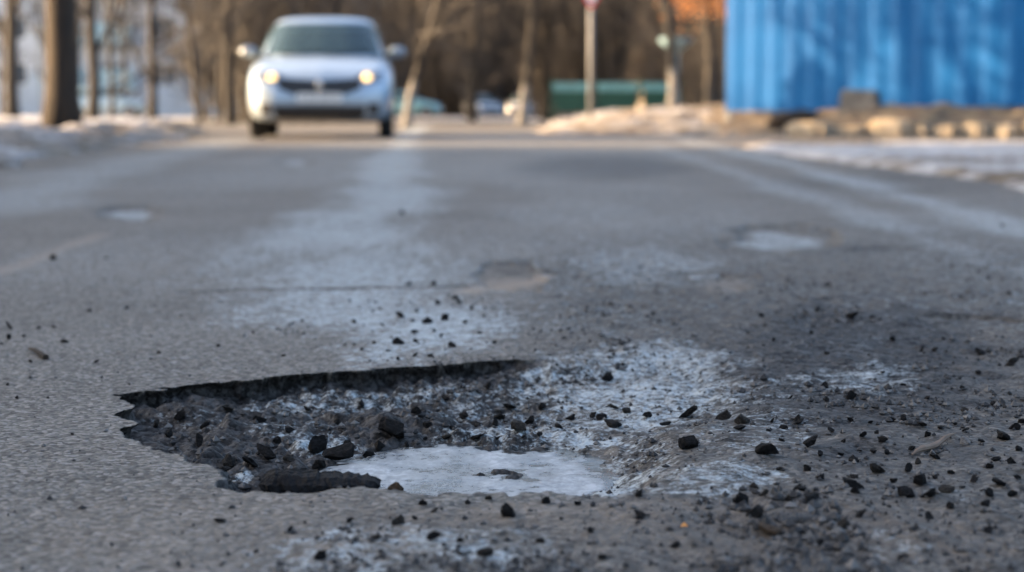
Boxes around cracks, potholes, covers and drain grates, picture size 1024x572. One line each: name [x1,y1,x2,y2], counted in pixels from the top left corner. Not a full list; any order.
pothole [87,202,168,221]
pothole [112,349,792,502]
pothole [466,257,559,295]
pothole [701,221,852,258]
